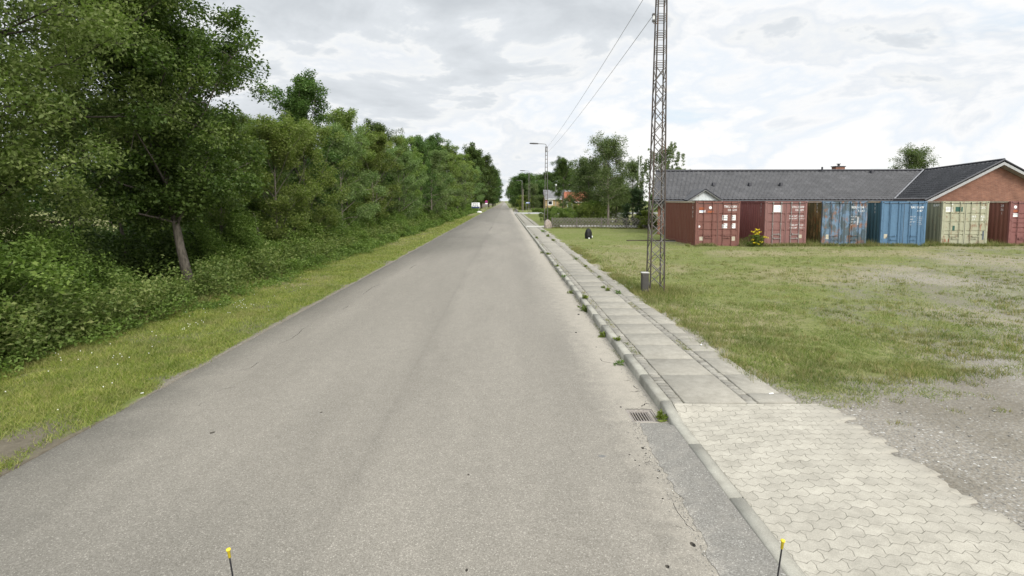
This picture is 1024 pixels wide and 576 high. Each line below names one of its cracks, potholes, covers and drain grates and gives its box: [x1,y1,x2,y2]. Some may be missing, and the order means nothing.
drain grate [625,409,660,422]
